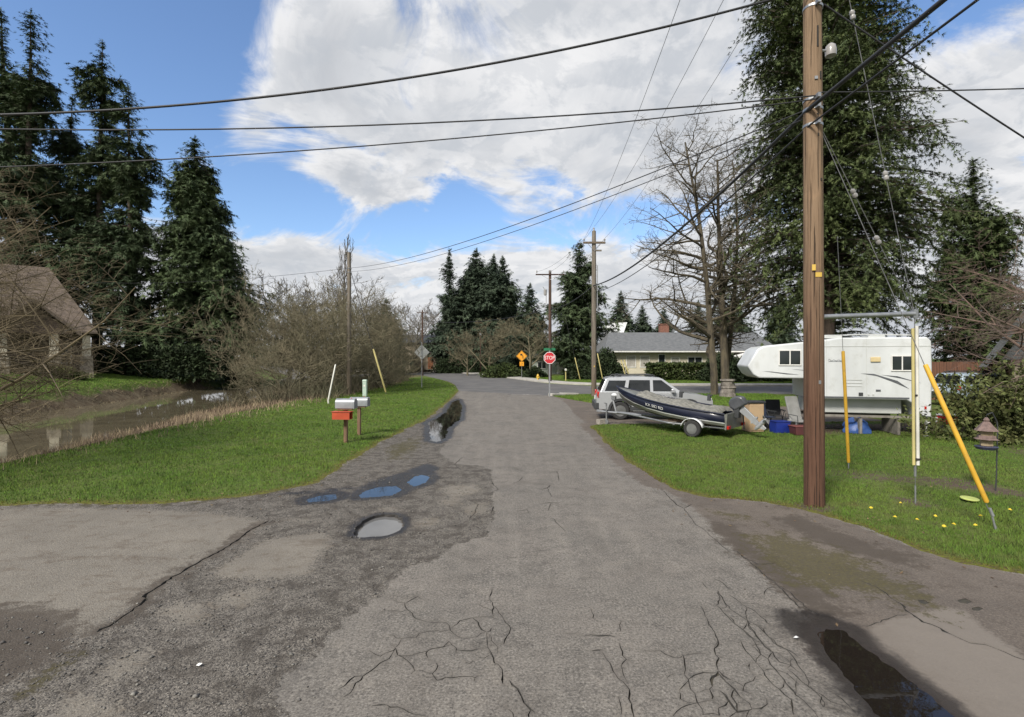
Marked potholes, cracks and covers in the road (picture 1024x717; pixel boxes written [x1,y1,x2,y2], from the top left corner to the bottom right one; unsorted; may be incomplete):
crack [341,592,534,717]
pothole [354,514,405,537]
crack [644,494,854,717]
crack [567,610,634,717]
